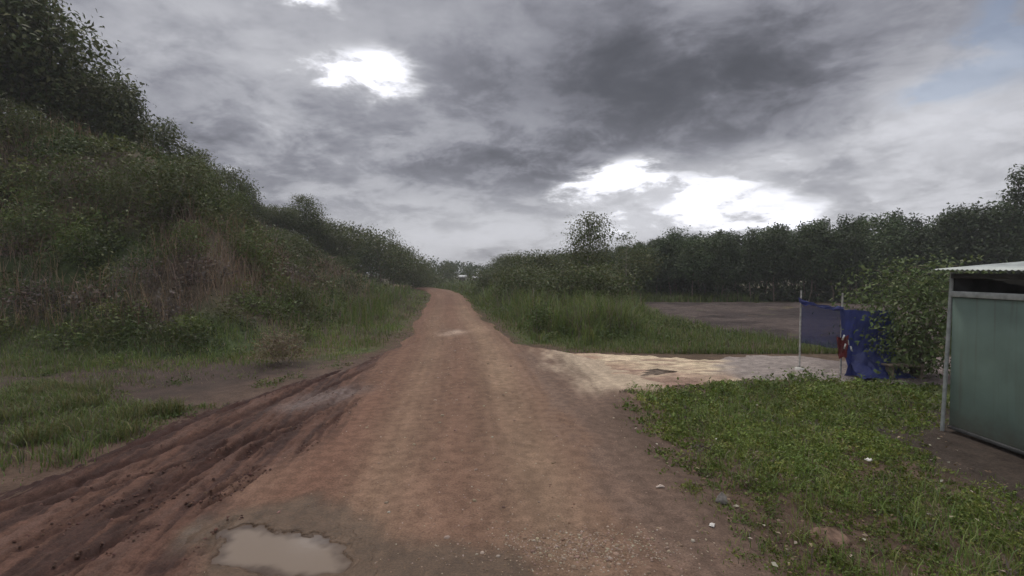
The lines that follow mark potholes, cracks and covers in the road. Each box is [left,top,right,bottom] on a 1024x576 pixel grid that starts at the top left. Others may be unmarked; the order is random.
pothole [186,514,378,576]
